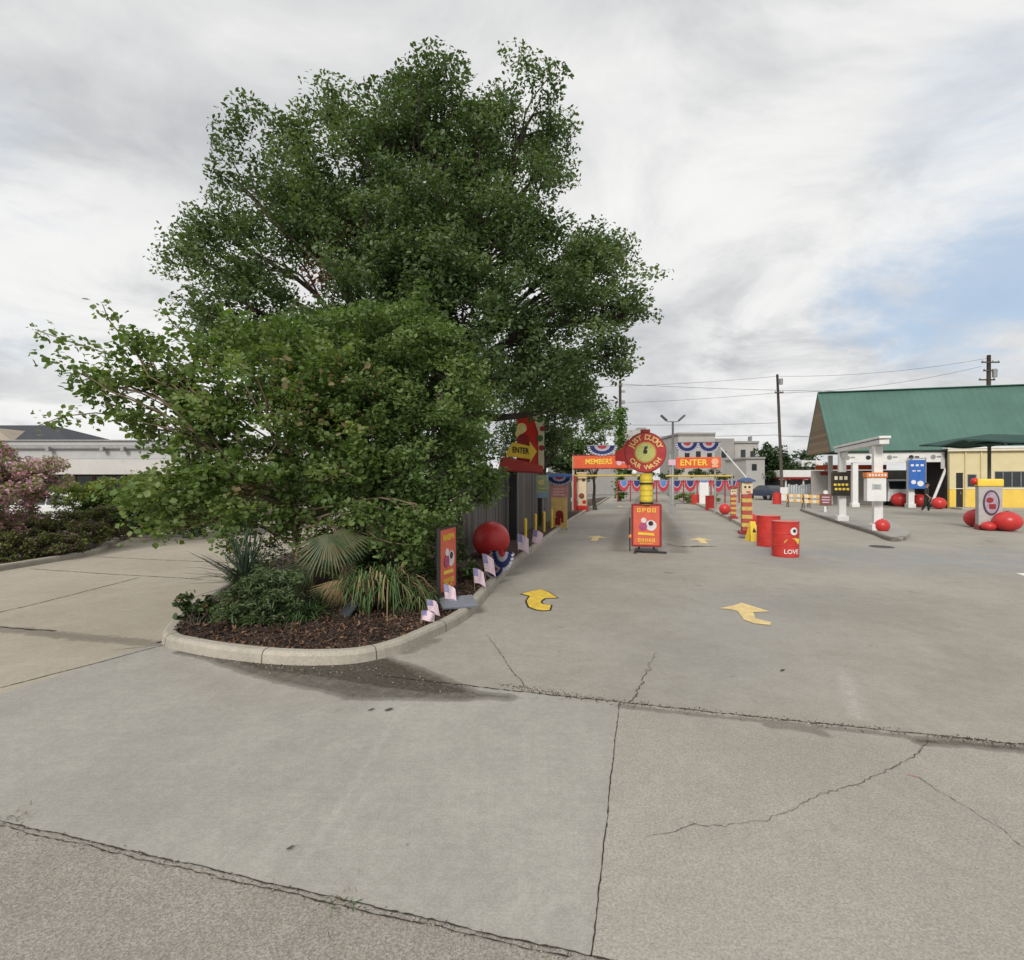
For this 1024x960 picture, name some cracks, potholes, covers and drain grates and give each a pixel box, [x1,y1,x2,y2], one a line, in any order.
crack [648,740,929,836]
